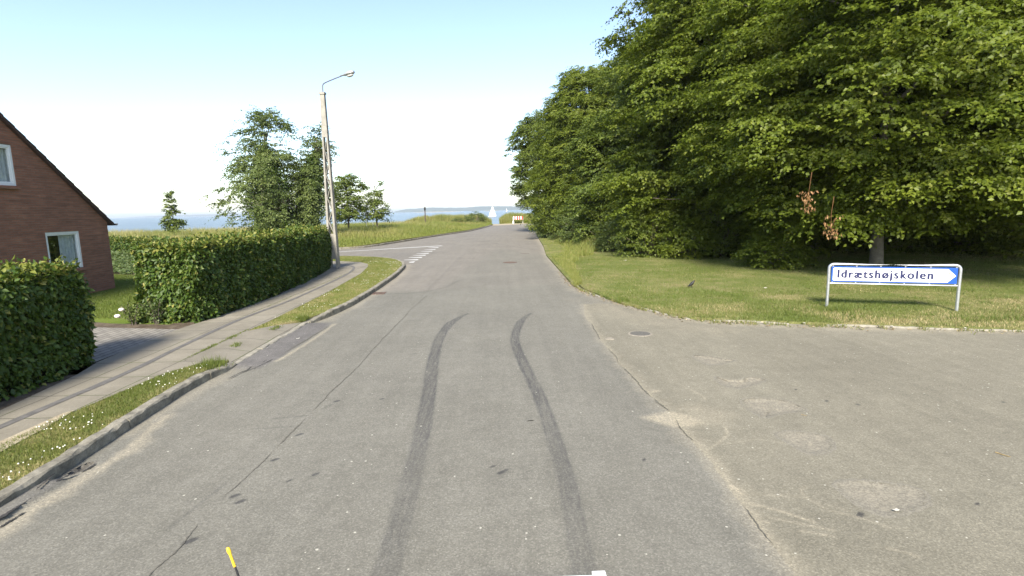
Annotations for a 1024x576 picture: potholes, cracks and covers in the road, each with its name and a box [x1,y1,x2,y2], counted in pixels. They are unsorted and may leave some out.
crack [148,297,425,576]
